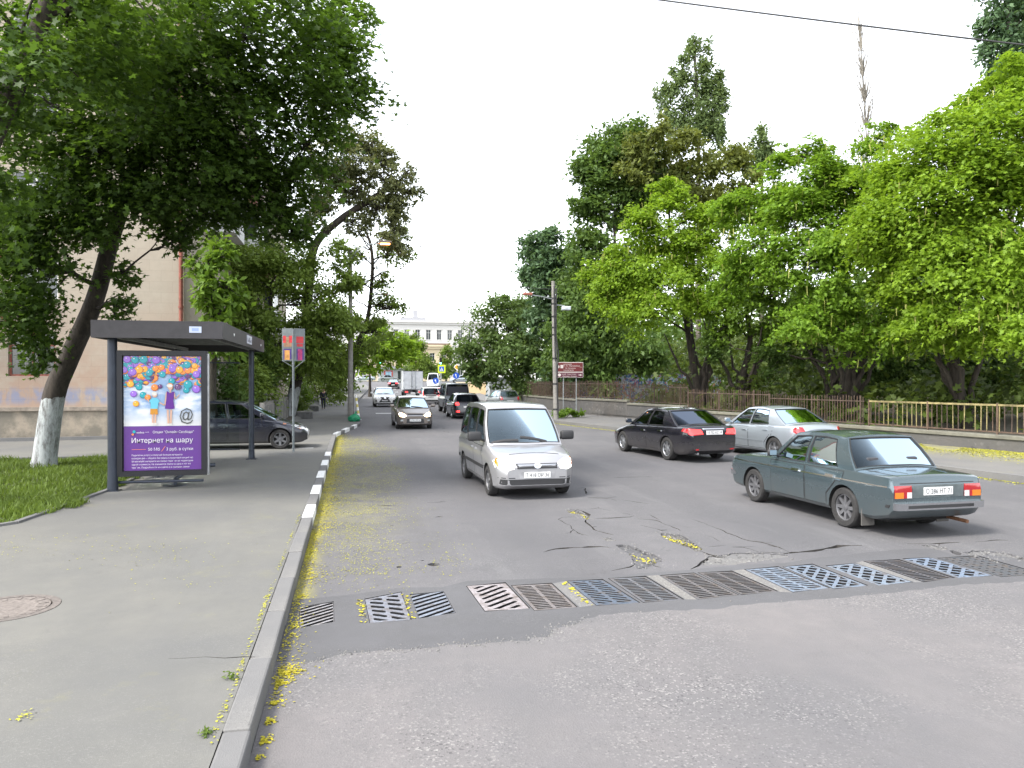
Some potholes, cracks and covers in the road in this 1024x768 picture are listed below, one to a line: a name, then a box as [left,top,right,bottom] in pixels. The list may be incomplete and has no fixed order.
drain grate [466,582,530,611]
drain grate [410,591,456,618]
drain grate [511,583,577,611]
drain grate [365,592,412,623]
drain grate [826,563,911,585]
drain grate [567,579,640,606]
drain grate [699,571,777,595]
drain grate [939,555,1024,577]
crack [356,487,862,622]
drain grate [784,564,867,589]
drain grate [864,559,955,582]
drain grate [660,573,739,599]
